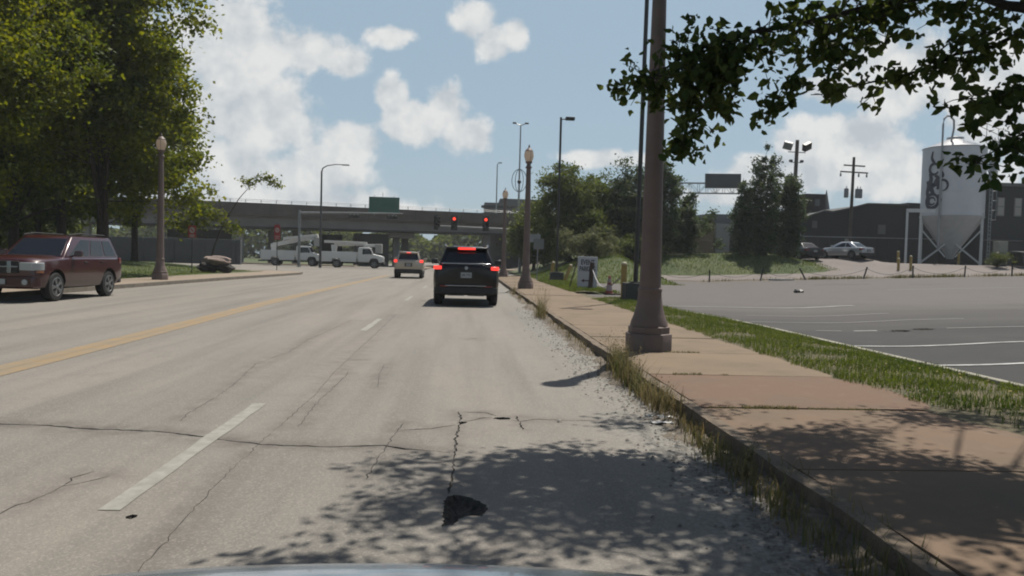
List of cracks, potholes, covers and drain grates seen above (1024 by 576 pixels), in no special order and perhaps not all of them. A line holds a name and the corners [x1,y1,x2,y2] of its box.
pothole [442,495,488,527]
crack [8,321,588,494]
crack [0,472,108,514]
